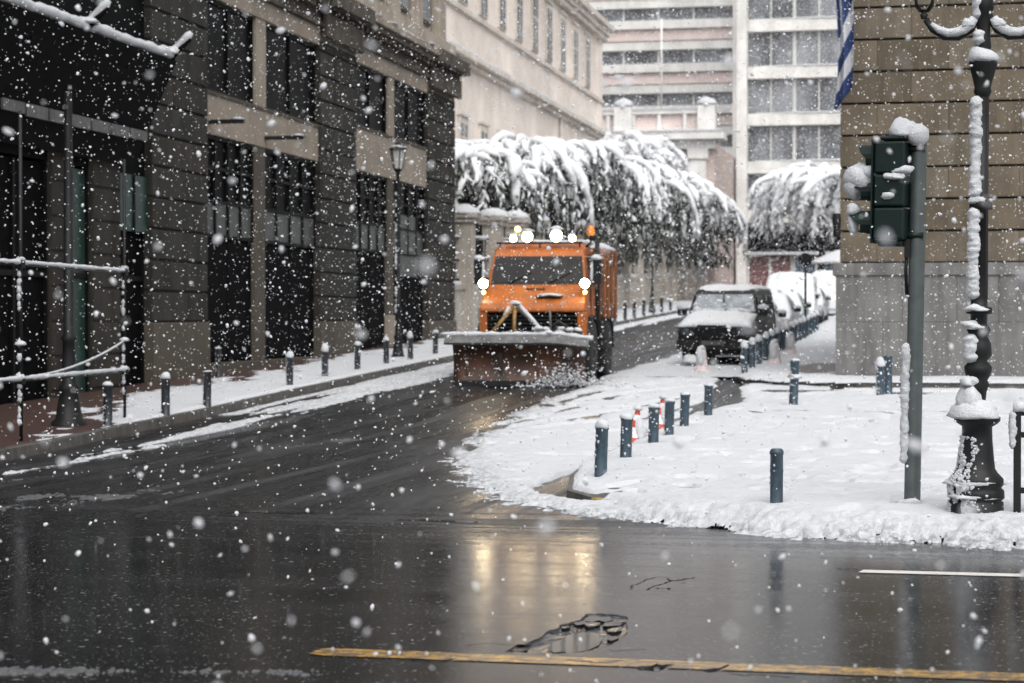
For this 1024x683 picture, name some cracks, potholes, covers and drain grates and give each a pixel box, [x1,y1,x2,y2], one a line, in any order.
pothole [505,613,629,654]
crack [629,577,692,590]
